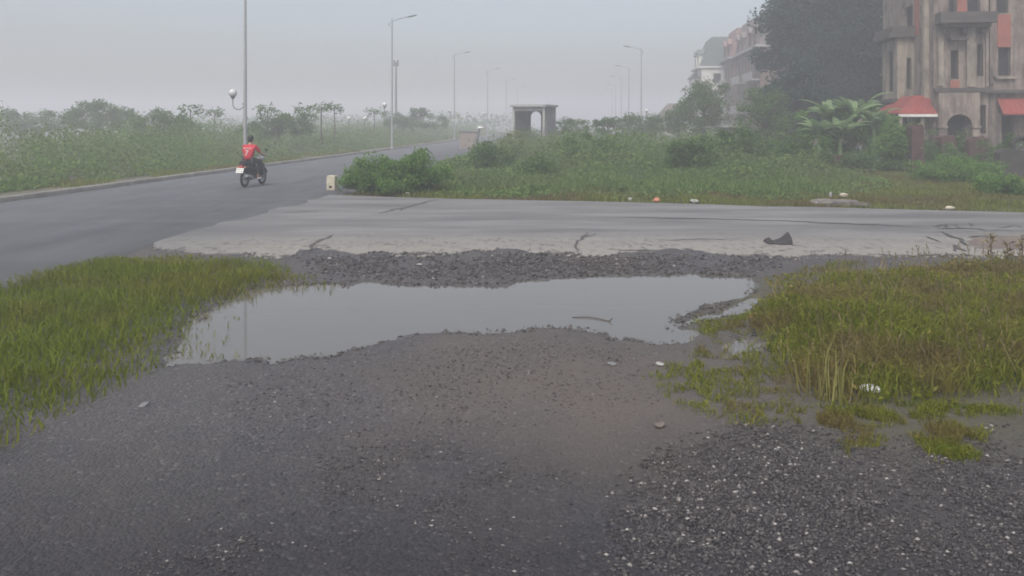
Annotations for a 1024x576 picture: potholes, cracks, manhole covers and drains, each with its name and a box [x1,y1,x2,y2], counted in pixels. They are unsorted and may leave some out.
crack [574,232,729,252]
crack [650,217,1023,251]
pothole [152,270,768,369]
crack [307,234,333,251]
